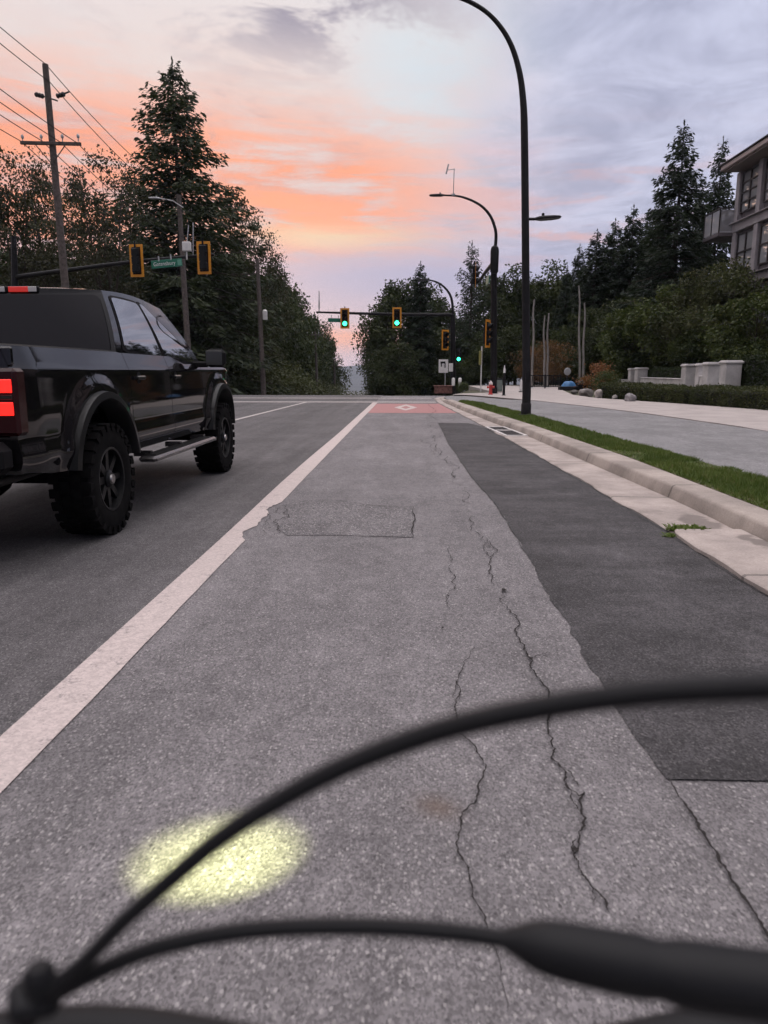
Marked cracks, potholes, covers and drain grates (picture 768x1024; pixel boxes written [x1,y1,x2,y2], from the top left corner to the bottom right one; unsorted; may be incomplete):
drain grate [485,426,528,436]
crack [263,419,611,1011]
